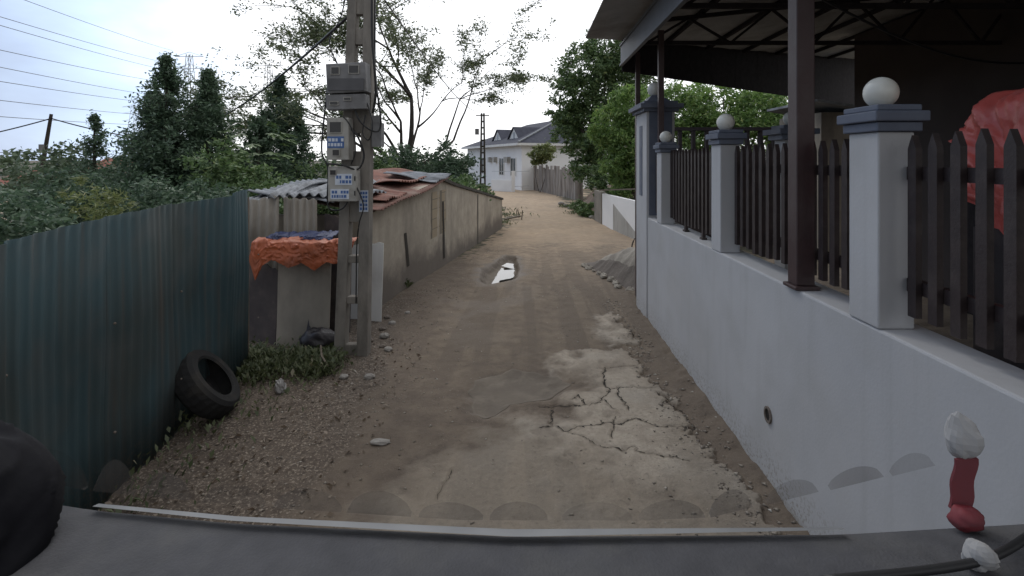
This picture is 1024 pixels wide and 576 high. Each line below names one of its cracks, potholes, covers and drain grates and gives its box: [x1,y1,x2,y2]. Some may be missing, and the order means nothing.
pothole [482,259,518,285]
crack [539,366,696,461]
